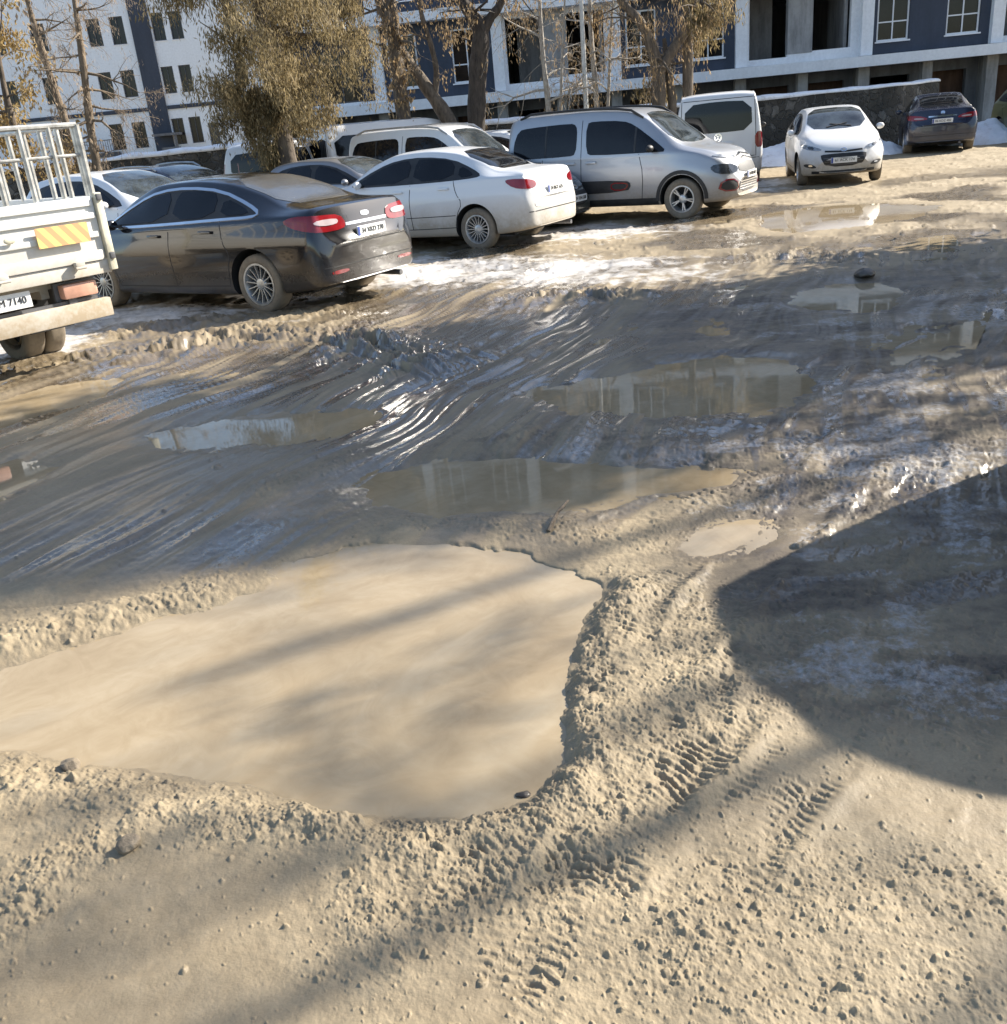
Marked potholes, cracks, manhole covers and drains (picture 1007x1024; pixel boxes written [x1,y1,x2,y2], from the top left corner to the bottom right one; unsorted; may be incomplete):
pothole [351,454,754,521]
pothole [0,528,618,823]
pothole [525,355,817,418]
pothole [142,407,384,453]
pothole [675,515,781,563]
